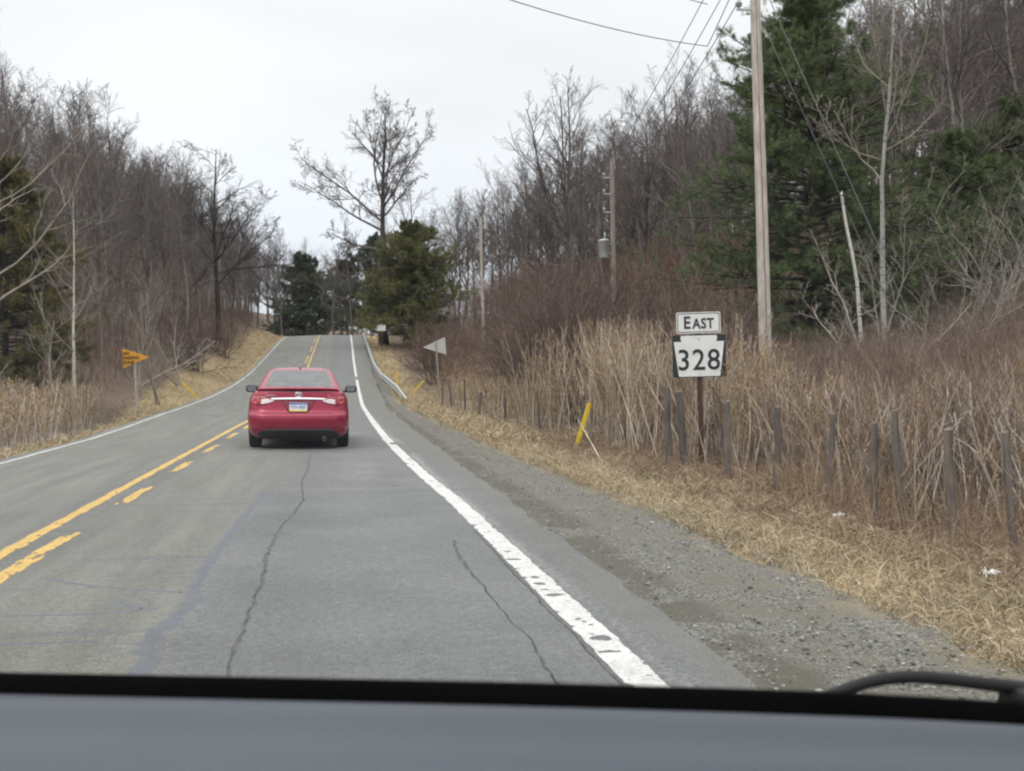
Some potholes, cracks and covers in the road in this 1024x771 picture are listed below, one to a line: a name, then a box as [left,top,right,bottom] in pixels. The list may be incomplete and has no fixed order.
crack [453,531,623,685]
crack [127,455,311,676]
